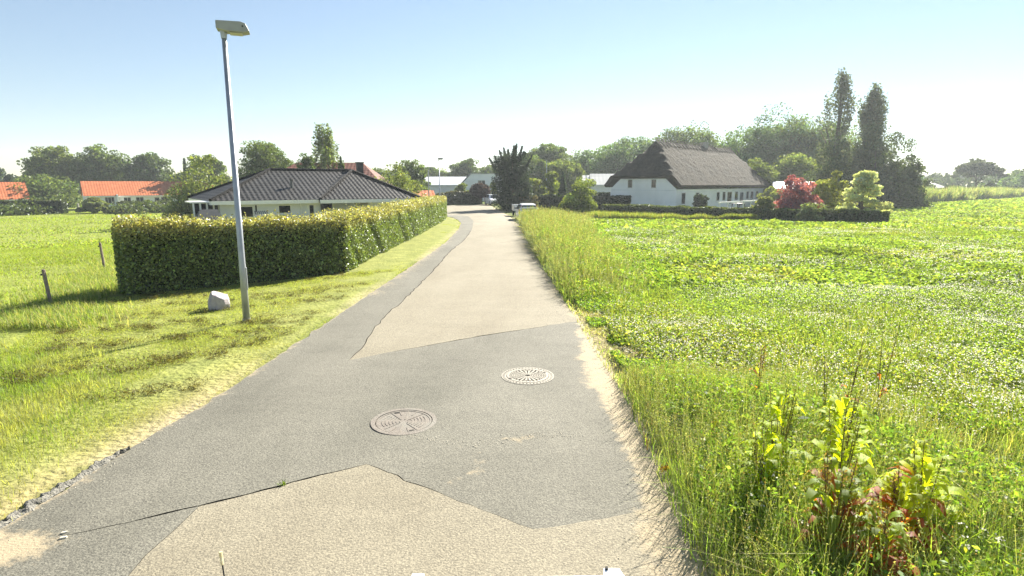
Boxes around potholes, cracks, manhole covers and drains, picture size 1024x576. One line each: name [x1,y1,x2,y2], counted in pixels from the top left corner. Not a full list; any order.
manhole cover [501,367,554,385]
manhole cover [371,408,437,435]
